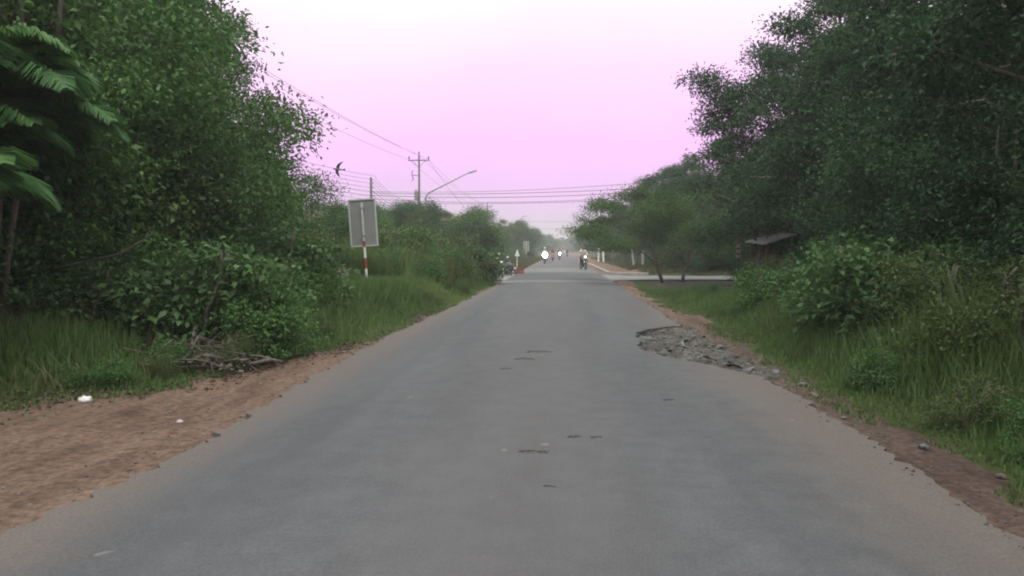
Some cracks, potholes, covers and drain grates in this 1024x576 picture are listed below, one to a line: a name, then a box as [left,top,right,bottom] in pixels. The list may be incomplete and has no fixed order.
pothole [639,327,800,385]
